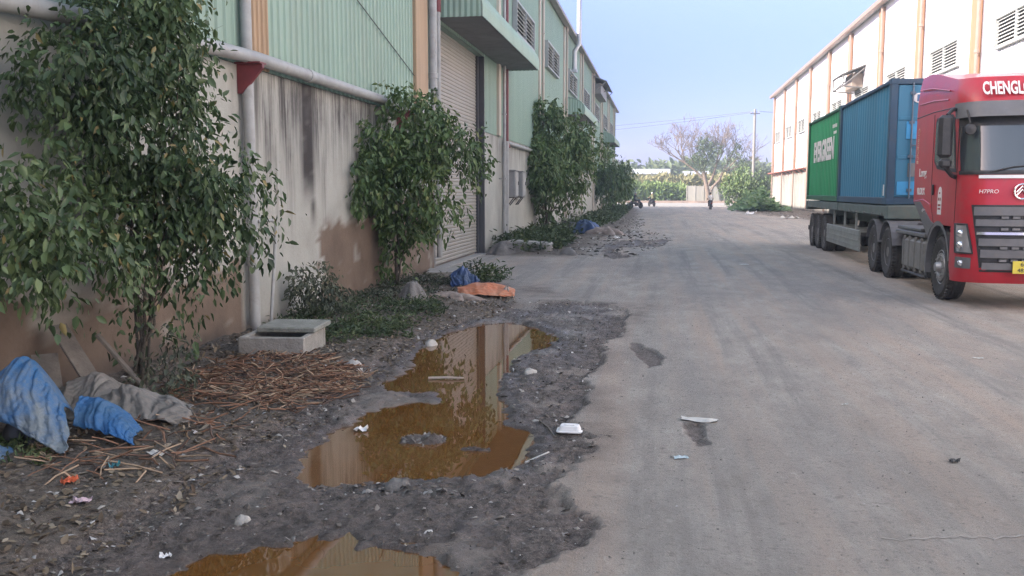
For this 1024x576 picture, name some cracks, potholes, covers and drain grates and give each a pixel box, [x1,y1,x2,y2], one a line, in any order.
pothole [628,342,667,368]
pothole [138,300,633,534]
pothole [675,421,713,448]
pothole [6,495,601,576]
